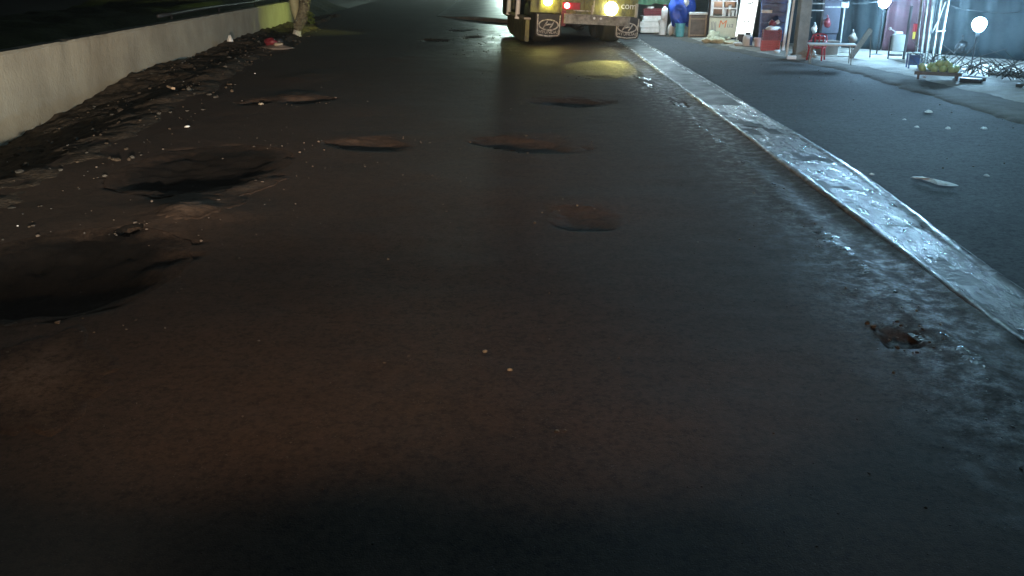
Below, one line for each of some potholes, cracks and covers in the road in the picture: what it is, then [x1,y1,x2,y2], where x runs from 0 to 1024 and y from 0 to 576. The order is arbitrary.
pothole [0,227,194,327]
pothole [872,324,932,349]
pothole [283,94,334,104]
pothole [104,145,293,197]
pothole [547,204,630,231]
